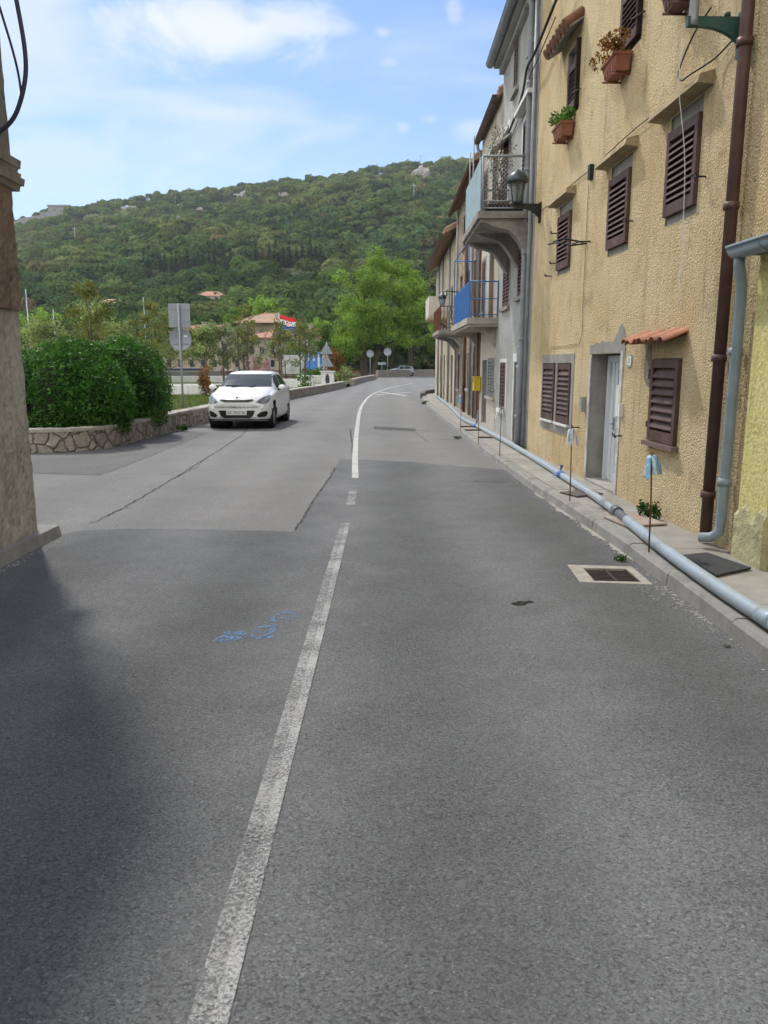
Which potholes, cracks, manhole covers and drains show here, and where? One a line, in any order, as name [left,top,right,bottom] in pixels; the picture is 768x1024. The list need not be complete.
crack [89,430,247,524]
drain grate [567,565,653,585]
